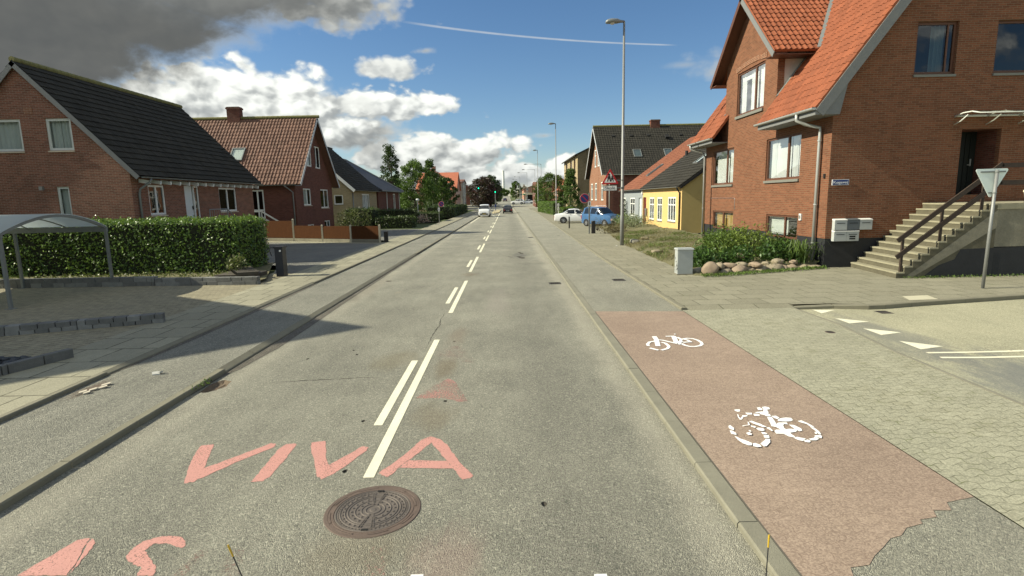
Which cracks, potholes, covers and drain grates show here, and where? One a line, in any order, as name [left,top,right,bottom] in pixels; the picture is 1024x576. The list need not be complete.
manhole cover [323,486,421,539]
